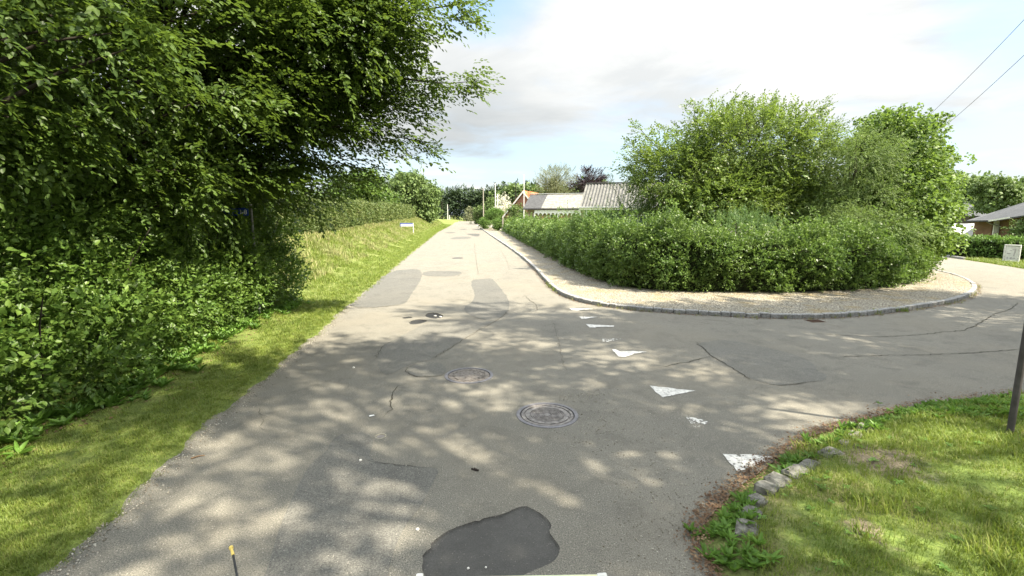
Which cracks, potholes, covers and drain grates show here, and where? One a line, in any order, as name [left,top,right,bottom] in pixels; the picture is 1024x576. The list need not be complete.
manhole cover [516,402,578,428]
manhole cover [445,367,493,384]
crack [383,365,443,417]
crack [661,344,763,389]
